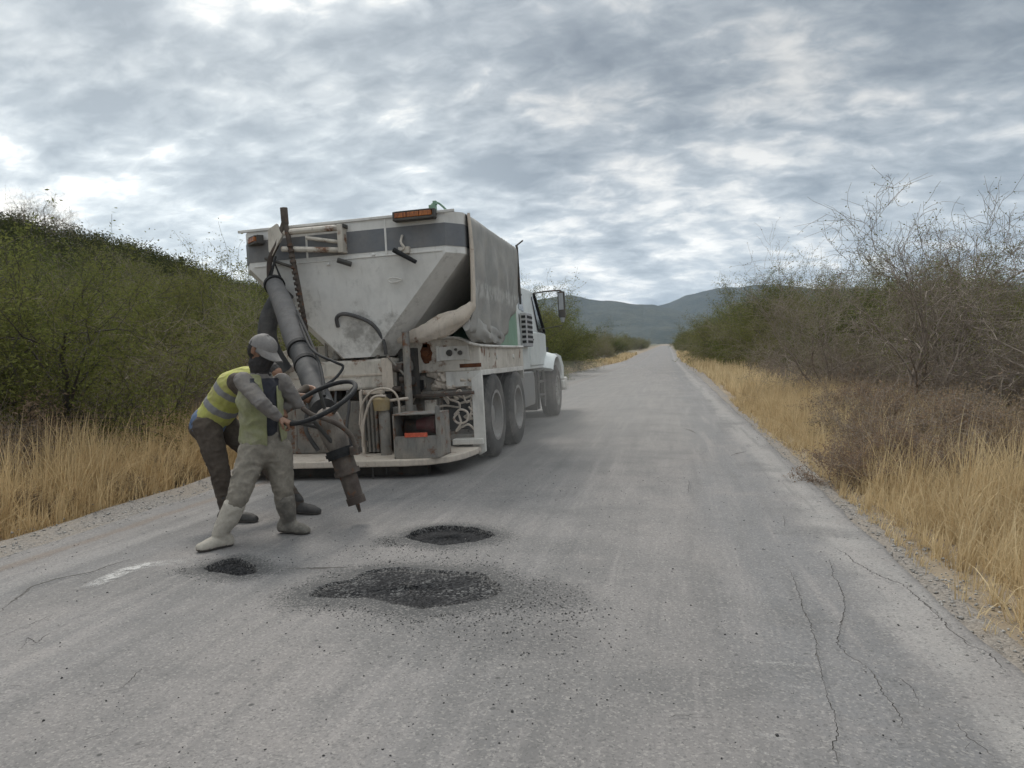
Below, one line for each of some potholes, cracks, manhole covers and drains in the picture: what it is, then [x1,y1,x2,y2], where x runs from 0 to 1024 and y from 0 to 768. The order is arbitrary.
crack [0,558,135,649]
crack [778,515,1015,766]
